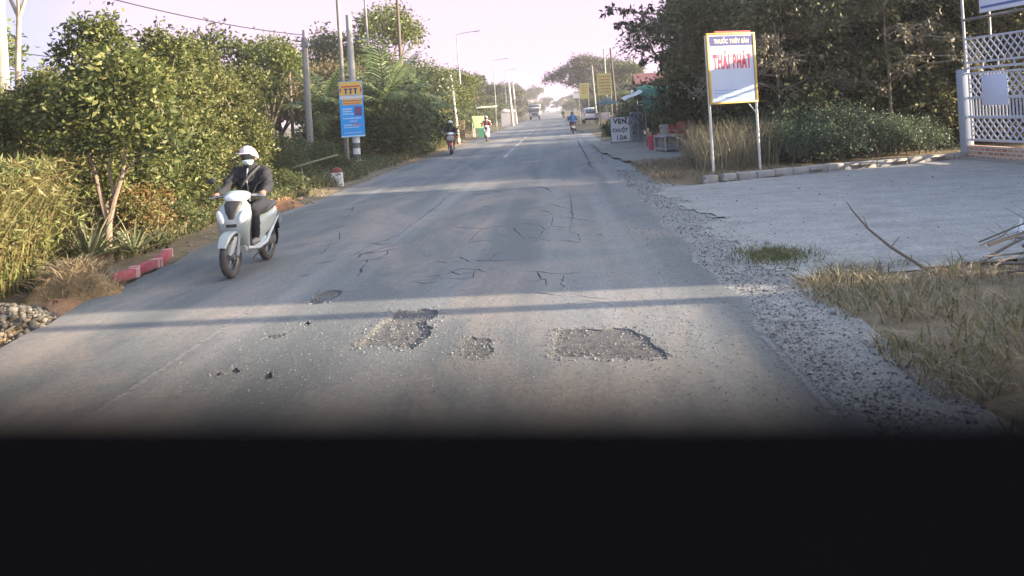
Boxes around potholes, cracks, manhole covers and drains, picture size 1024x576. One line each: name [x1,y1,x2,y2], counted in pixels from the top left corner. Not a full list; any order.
pothole [303,289,348,304]
pothole [351,305,450,353]
pothole [450,334,496,360]
pothole [545,325,674,365]
crack [284,192,418,281]
crack [413,186,601,284]
